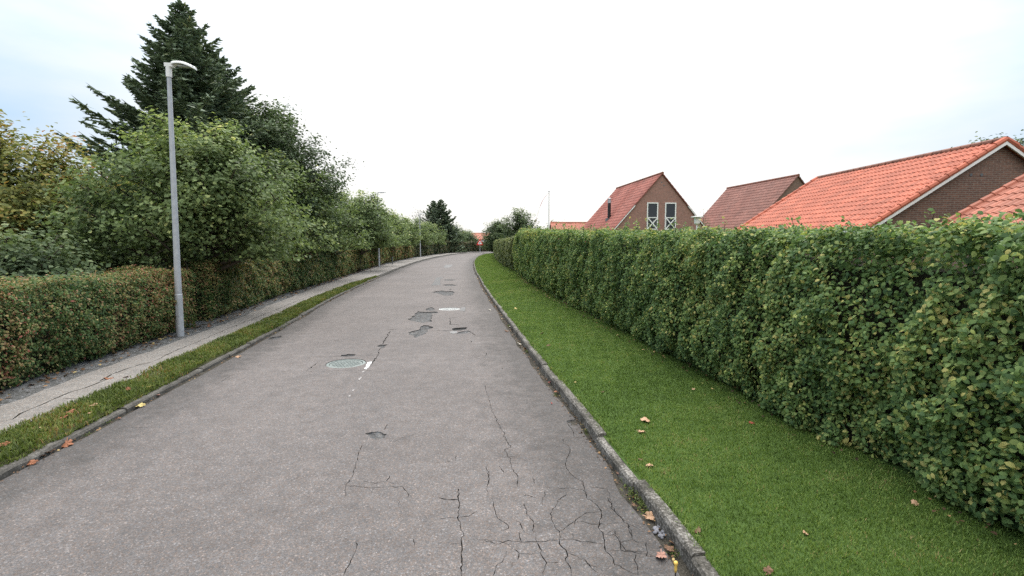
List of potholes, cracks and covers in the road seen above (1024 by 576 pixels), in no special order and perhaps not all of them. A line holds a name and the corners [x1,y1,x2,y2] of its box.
pothole [365,431,387,440]
pothole [409,325,433,338]
crack [345,446,409,504]
manhole cover [326,359,366,368]
crack [441,387,648,576]
pothole [408,311,438,323]
